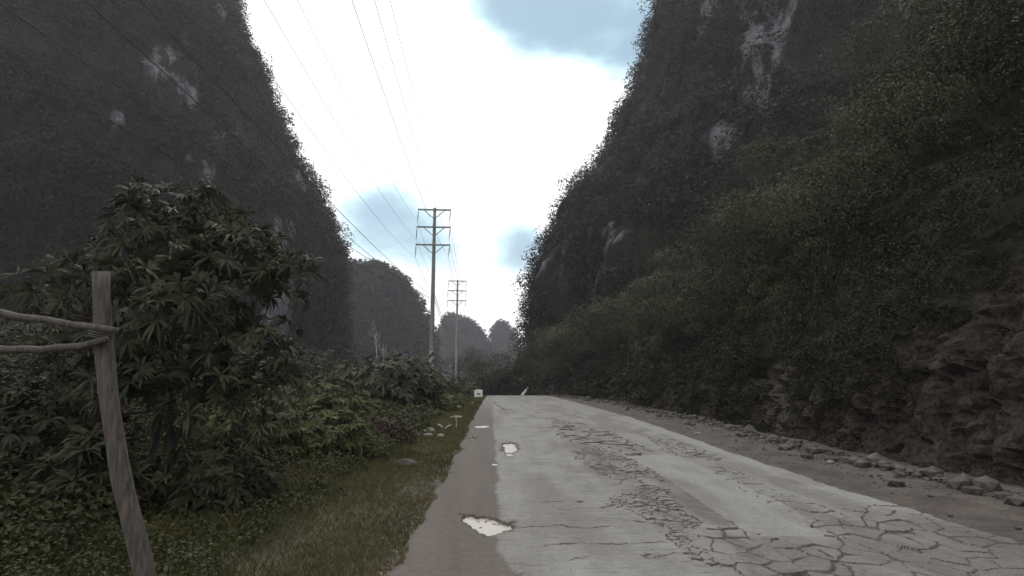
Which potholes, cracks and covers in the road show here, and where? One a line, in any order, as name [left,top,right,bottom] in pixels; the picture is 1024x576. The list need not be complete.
pothole [501,441,520,453]
crack [523,414,1024,576]
pothole [459,513,516,537]
